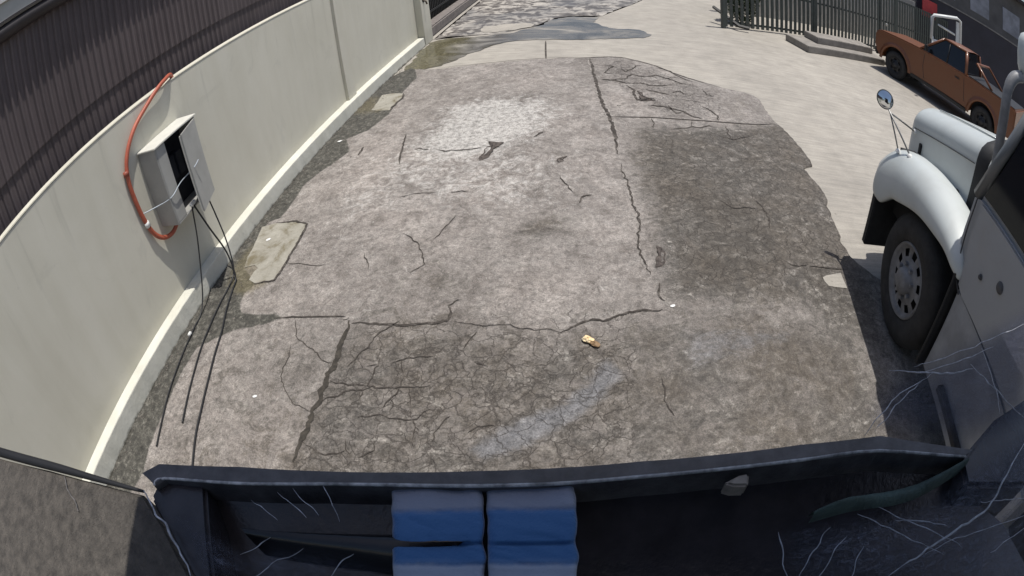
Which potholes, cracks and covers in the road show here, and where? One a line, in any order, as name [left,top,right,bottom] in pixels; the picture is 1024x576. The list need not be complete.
crack [604,61,749,140]
pothole [479,141,504,160]
crack [280,164,665,462]
